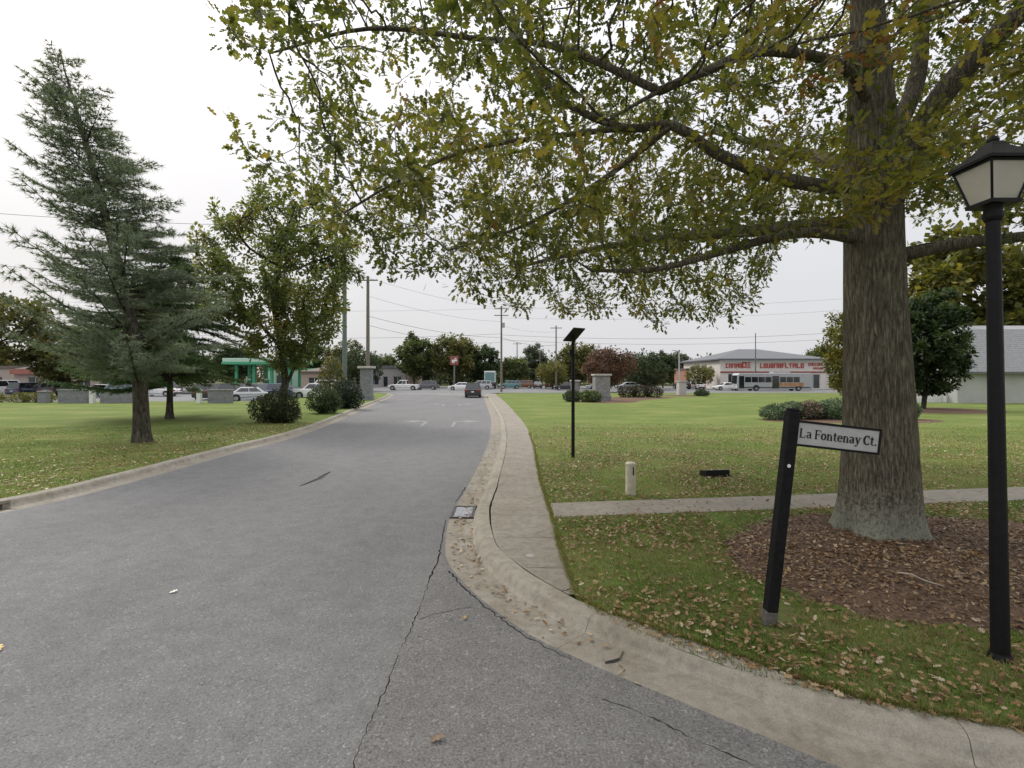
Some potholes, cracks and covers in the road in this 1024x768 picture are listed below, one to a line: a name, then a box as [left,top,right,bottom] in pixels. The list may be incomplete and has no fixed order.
crack [353,520,571,768]
